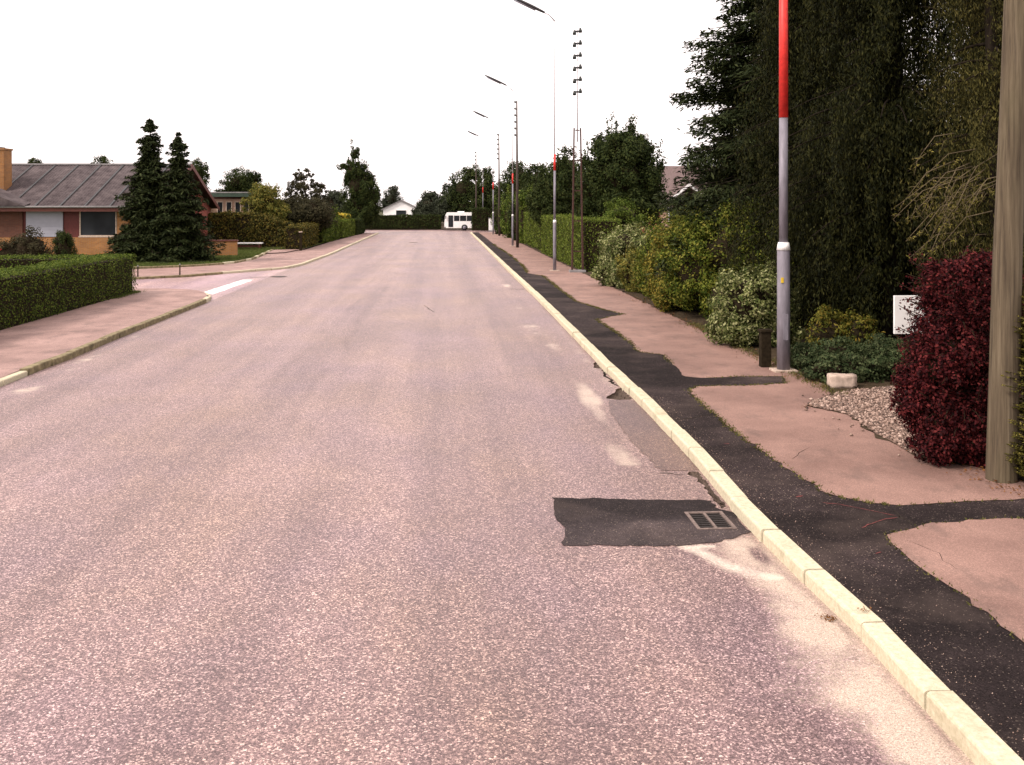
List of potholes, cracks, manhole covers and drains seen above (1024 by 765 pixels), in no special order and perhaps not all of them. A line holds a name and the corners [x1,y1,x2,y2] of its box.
pothole [606,388,632,400]
